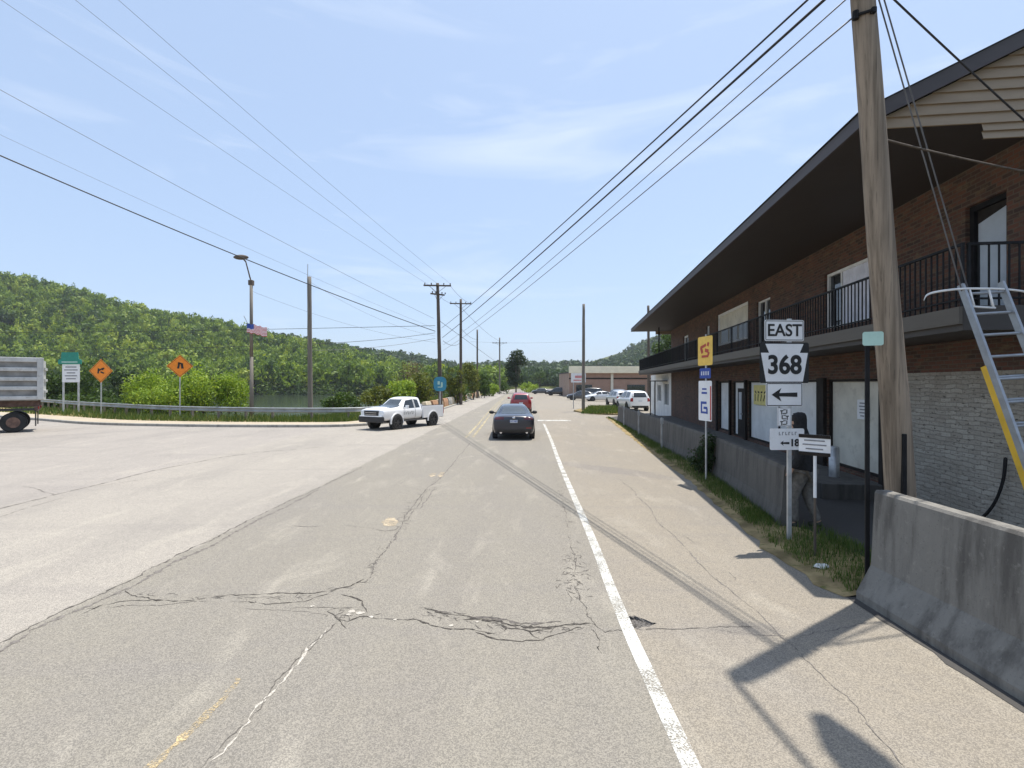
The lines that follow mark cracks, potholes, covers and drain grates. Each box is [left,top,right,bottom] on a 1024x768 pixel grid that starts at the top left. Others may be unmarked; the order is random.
crack [346,442,471,579]
pothole [628,616,656,629]
crack [84,579,600,651]
crack [622,481,905,768]
